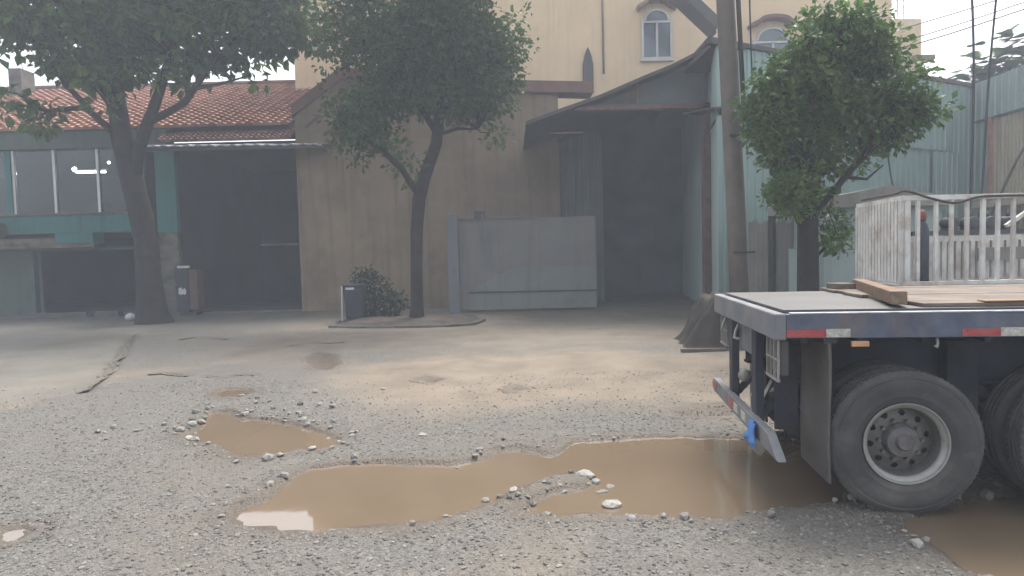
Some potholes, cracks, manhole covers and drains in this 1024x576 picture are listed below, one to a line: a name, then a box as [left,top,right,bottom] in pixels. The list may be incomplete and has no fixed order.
pothole [498,383,537,394]
crack [77,334,256,394]
pothole [205,431,861,539]
pothole [409,375,452,385]
pothole [206,386,264,400]
pothole [165,407,355,460]
pothole [882,482,1024,576]
pothole [300,351,348,371]
